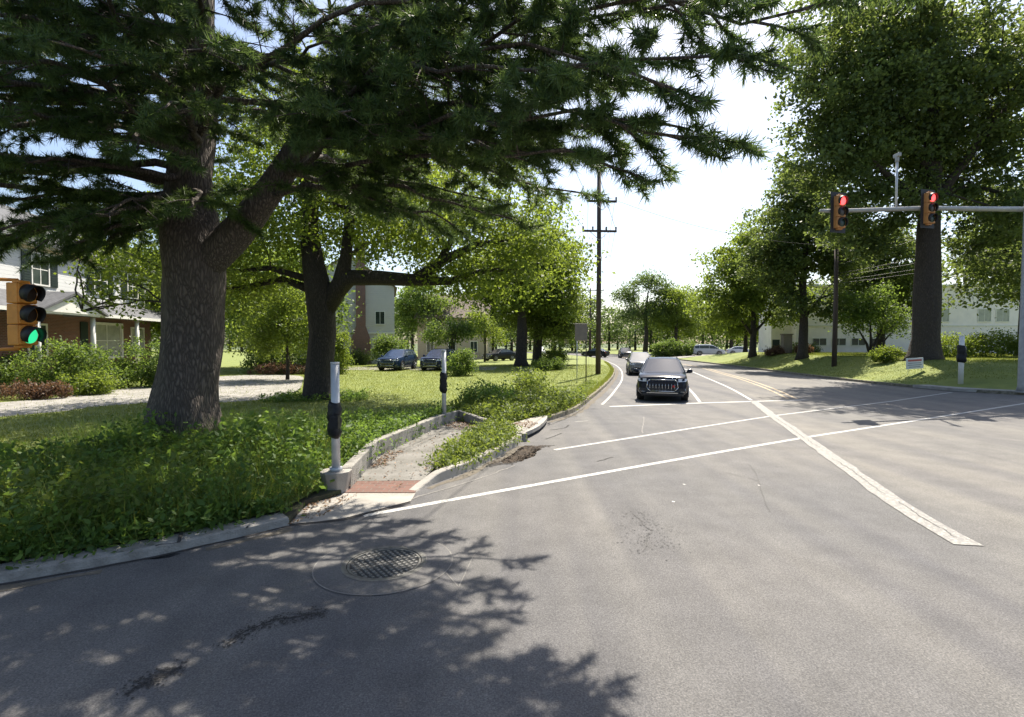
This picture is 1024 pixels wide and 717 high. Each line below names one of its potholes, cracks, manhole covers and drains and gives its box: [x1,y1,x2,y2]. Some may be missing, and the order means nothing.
crack [604,507,700,562]
pothole [500,445,541,463]
